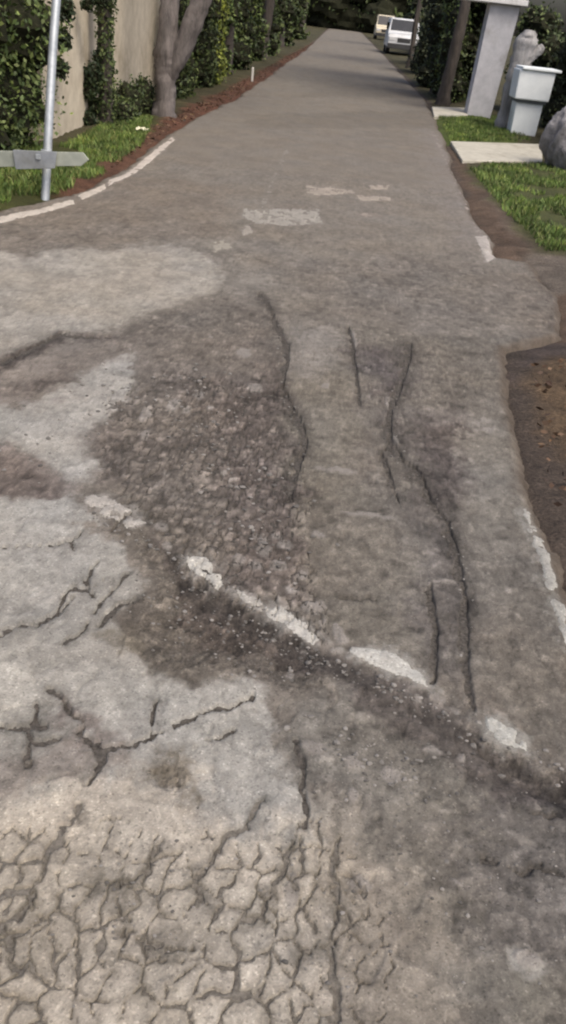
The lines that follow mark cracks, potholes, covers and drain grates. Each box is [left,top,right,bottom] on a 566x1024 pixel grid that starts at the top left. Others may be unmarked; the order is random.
crack [347,329,361,406]
crack [0,740,394,1024]
crack [0,563,137,645]
crack [98,294,329,645]
crack [0,689,255,786]
crack [380,344,475,712]
